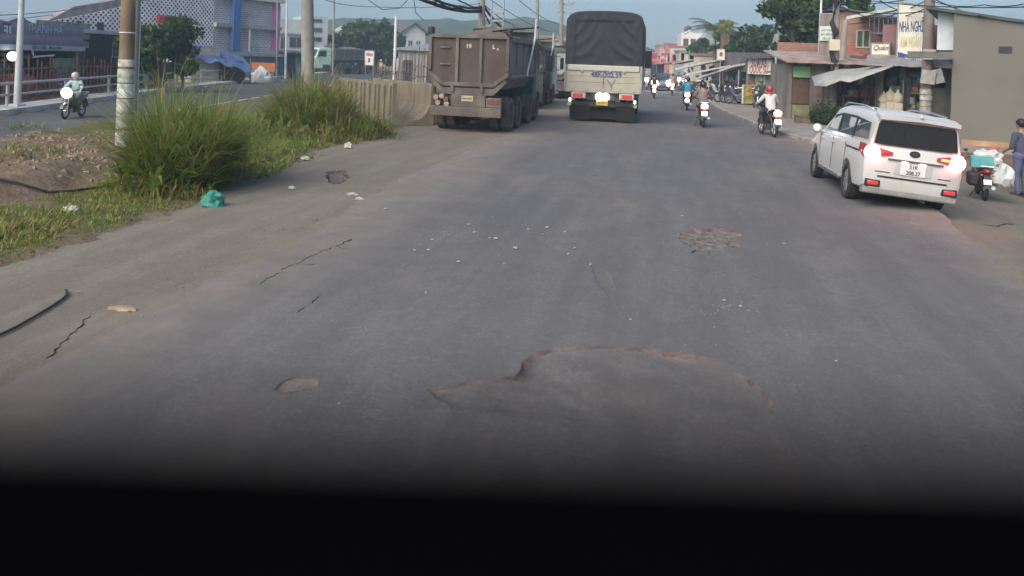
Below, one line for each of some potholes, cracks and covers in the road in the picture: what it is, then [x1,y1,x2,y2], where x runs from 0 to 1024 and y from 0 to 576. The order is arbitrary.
pothole [325,170,350,184]
pothole [677,228,746,254]
crack [259,239,352,286]
crack [46,315,91,358]
